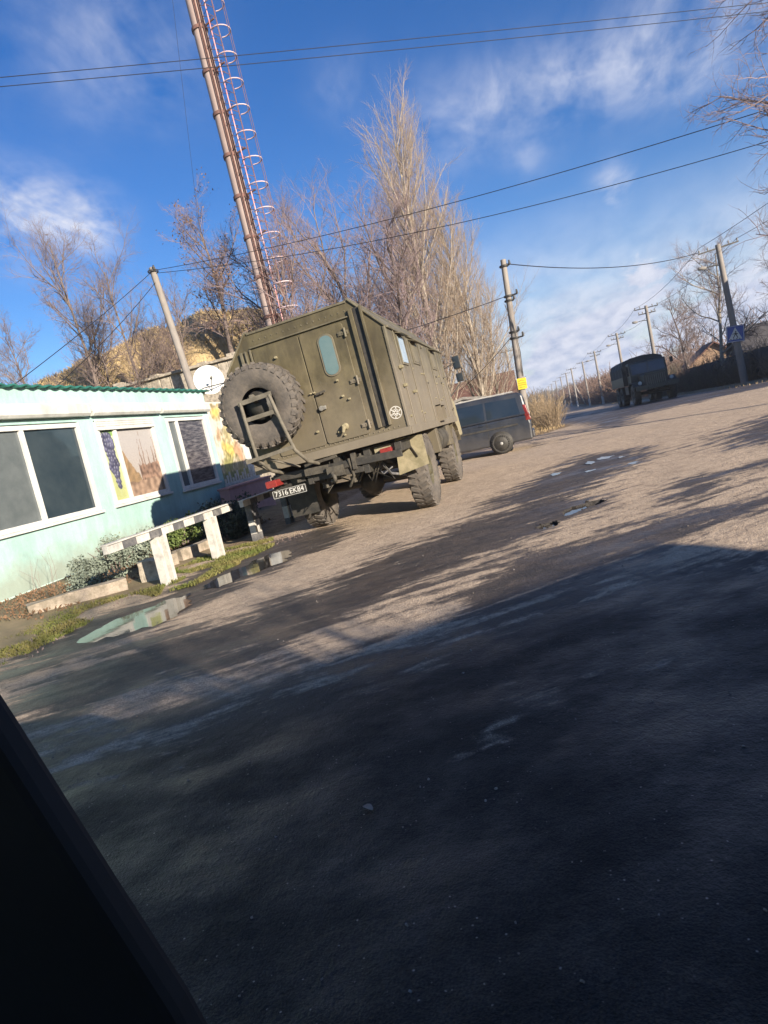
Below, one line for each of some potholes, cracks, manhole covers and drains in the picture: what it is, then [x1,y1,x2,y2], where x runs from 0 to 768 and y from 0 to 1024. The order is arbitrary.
pothole [535,520,560,529]
pothole [562,499,608,516]
